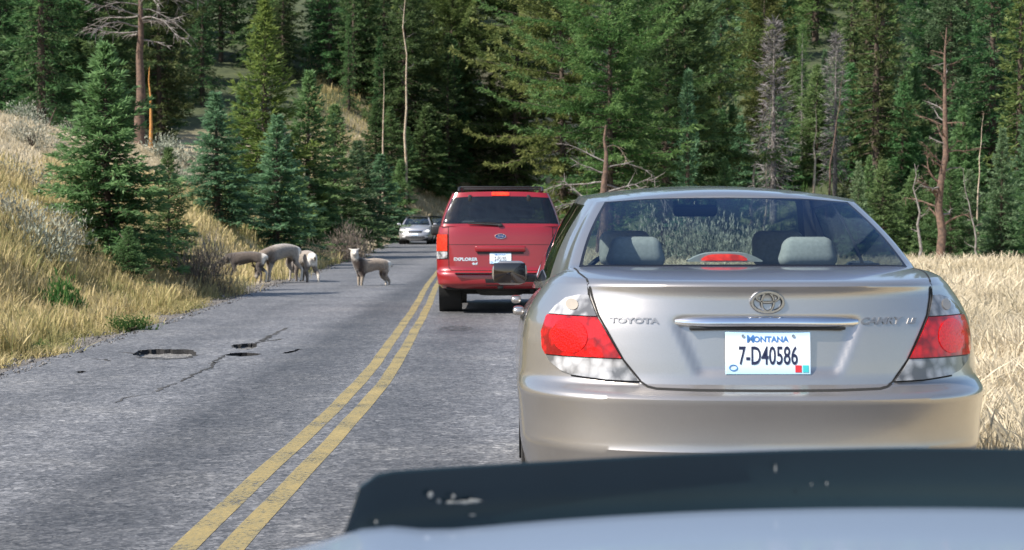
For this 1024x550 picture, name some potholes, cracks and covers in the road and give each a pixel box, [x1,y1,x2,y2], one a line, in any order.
crack [255,327,288,343]
pothole [231,342,261,351]
pothole [133,348,197,358]
crack [90,352,225,402]
